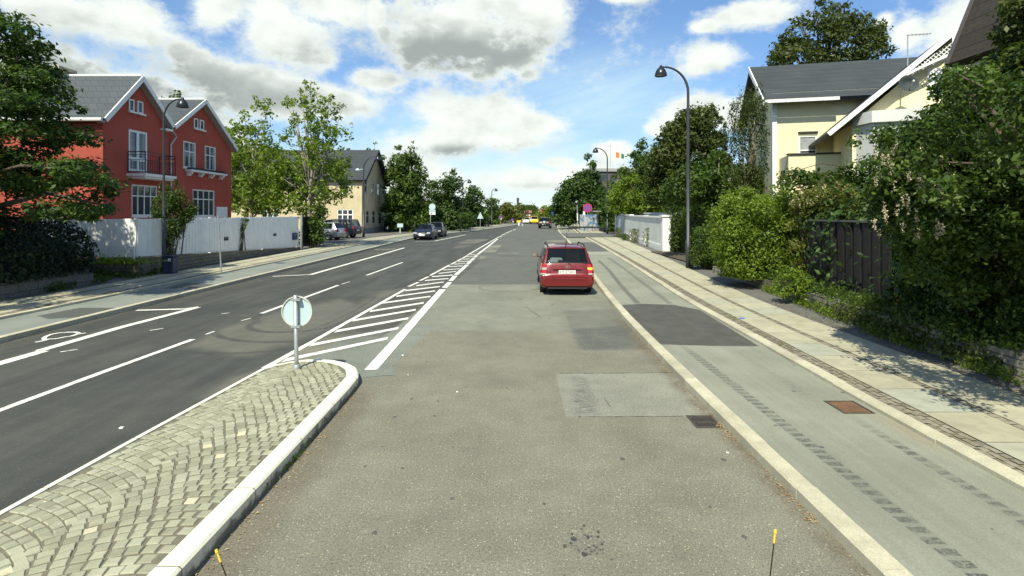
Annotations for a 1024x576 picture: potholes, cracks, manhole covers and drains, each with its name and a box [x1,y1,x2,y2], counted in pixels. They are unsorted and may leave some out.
manhole cover [824,401,876,414]
drain grate [685,415,723,428]
